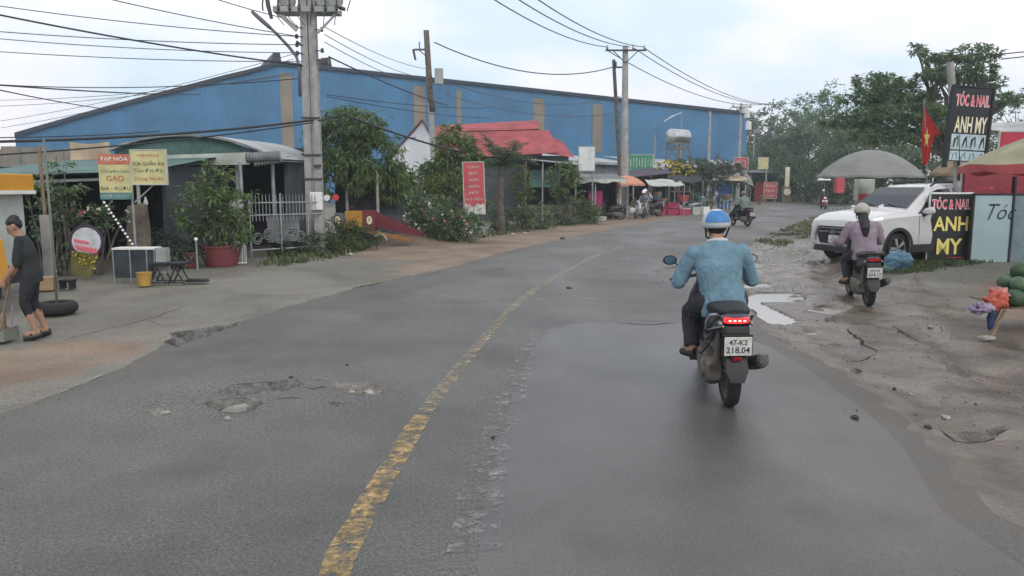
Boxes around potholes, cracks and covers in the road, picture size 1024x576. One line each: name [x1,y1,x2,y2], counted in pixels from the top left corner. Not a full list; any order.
pothole [146,408,171,416]
pothole [214,379,303,398]
pothole [954,424,1008,442]
crack [64,307,182,341]
crack [847,326,918,362]
pothole [200,398,265,411]
pothole [330,381,393,396]
pothole [164,322,239,348]
